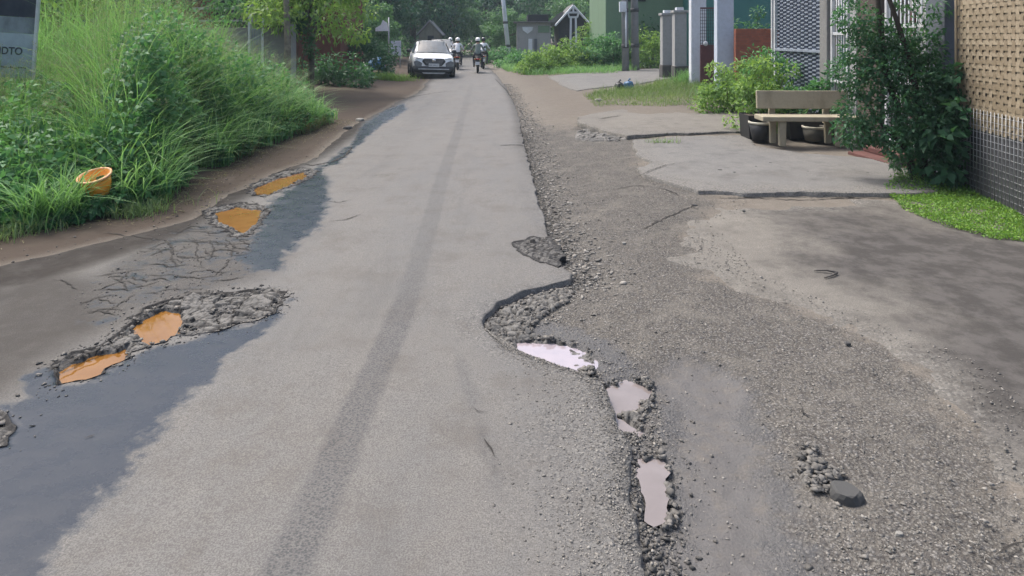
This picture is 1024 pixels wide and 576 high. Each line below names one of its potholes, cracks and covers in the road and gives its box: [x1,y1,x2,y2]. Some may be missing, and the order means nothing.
crack [621,163,853,229]
pothole [47,287,289,385]
crack [53,226,256,317]
pothole [484,287,597,377]
pothole [605,376,656,432]
pothole [202,202,271,237]
pothole [643,457,676,533]
pothole [511,236,566,268]
pothole [245,167,320,198]
